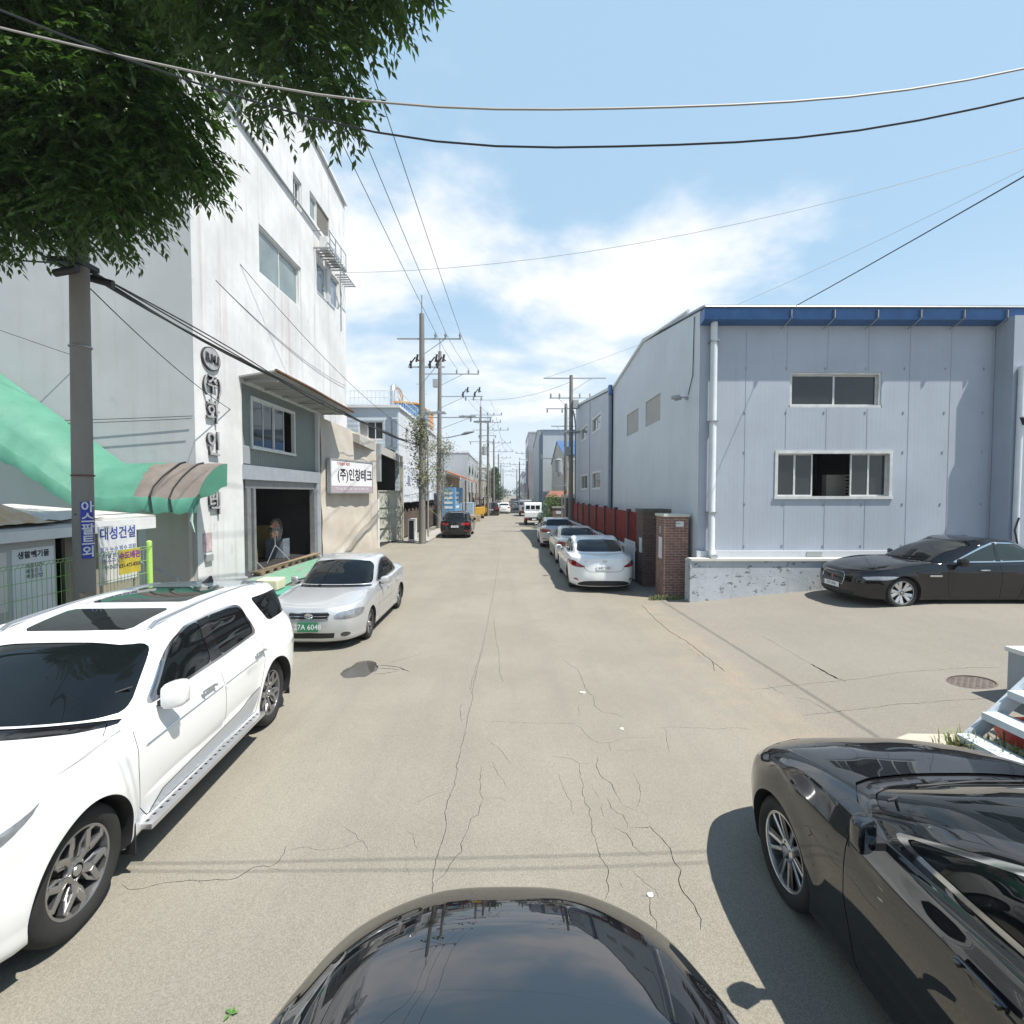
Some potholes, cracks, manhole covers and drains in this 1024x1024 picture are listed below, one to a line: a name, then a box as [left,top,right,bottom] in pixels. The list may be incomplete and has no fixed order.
crack [121,826,369,890]
pothole [340,660,378,678]
manhole cover [946,675,998,689]
crack [405,557,512,893]
crack [500,664,715,932]
crack [645,608,724,671]
crack [751,636,999,715]
